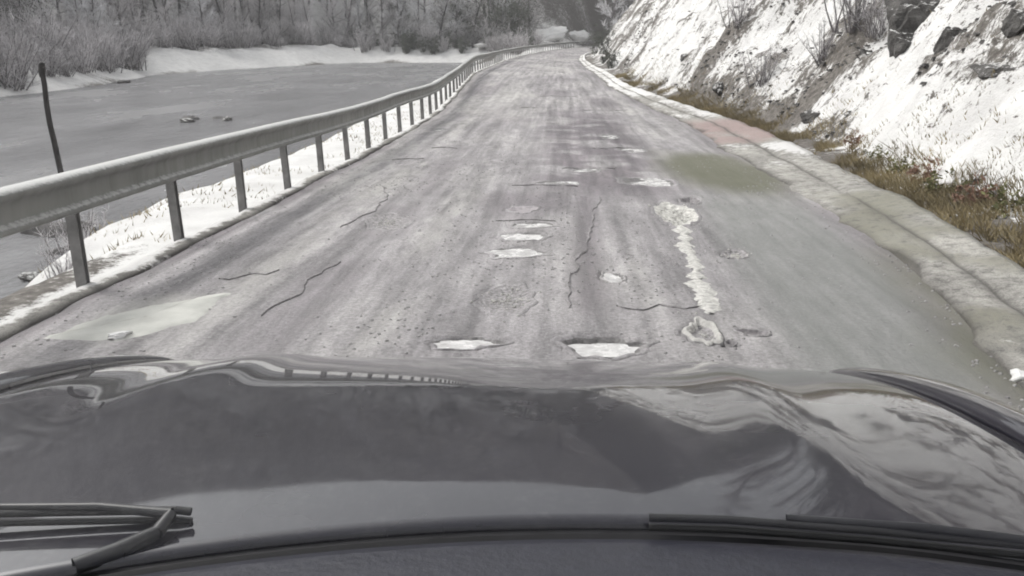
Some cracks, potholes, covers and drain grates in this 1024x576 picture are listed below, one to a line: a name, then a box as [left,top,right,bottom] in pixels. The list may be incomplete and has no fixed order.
pothole [720,244,752,260]
pothole [599,271,627,284]
crack [219,261,353,316]
pothole [733,328,772,337]
pothole [678,196,702,205]
crack [512,167,615,308]
crack [340,186,389,227]
pothole [678,312,733,347]
pothole [615,177,681,187]
crack [616,224,722,314]
pothole [417,336,515,351]
pothole [495,232,553,242]
